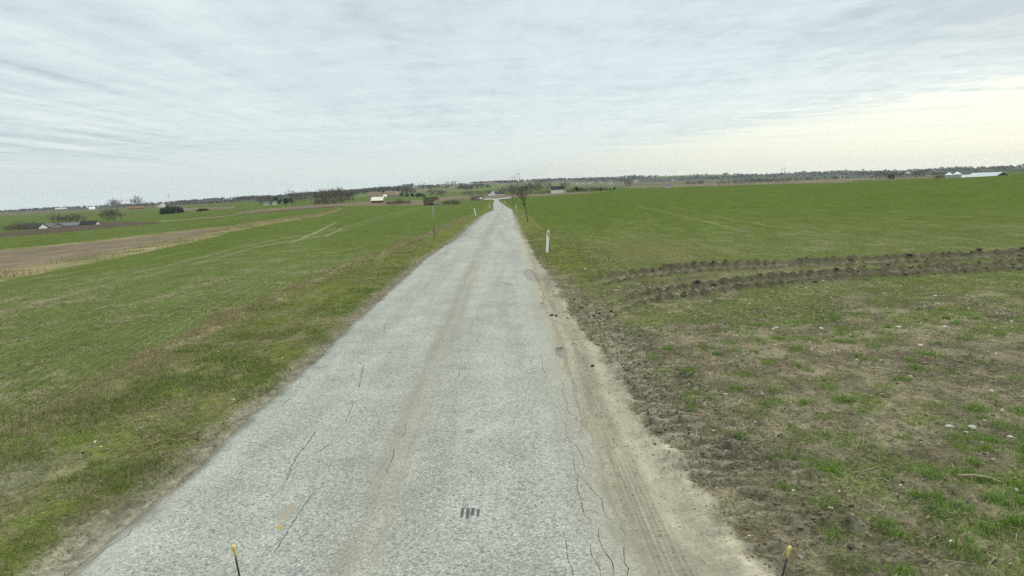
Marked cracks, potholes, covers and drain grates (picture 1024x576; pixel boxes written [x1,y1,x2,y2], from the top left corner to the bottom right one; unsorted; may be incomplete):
crack [540,356,629,576]
crack [270,489,315,554]
